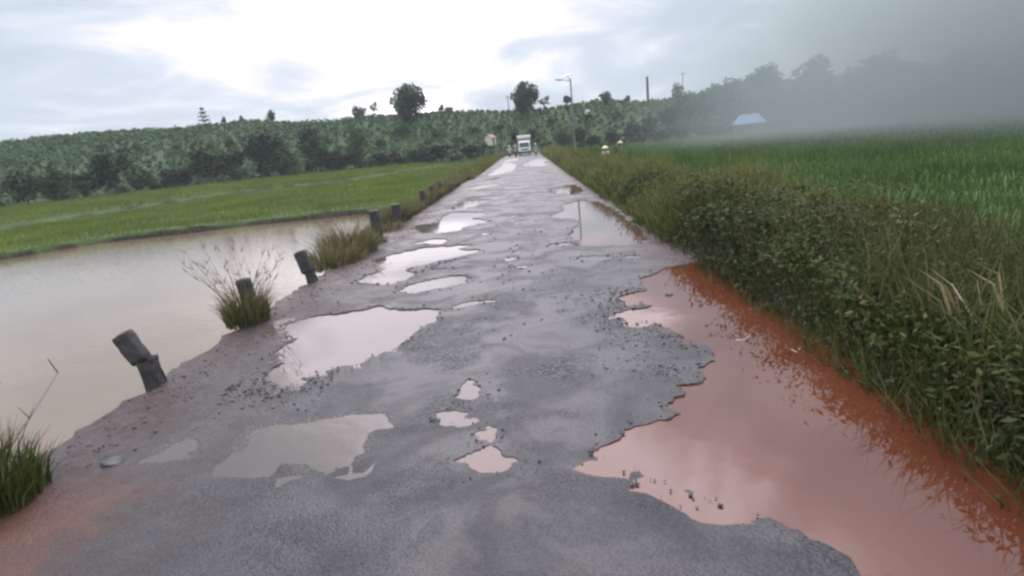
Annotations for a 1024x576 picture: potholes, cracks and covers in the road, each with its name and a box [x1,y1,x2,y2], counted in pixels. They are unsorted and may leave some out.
pothole [397,274,469,293]
pothole [407,211,492,234]
pothole [128,435,207,464]
pothole [452,418,524,473]
pothole [487,162,518,175]
pothole [433,410,470,426]
pothole [372,244,481,268]
pothole [573,262,1024,576]
pothole [354,265,419,285]
pothole [550,200,650,246]
pothole [453,378,481,400]
pothole [261,305,442,394]
